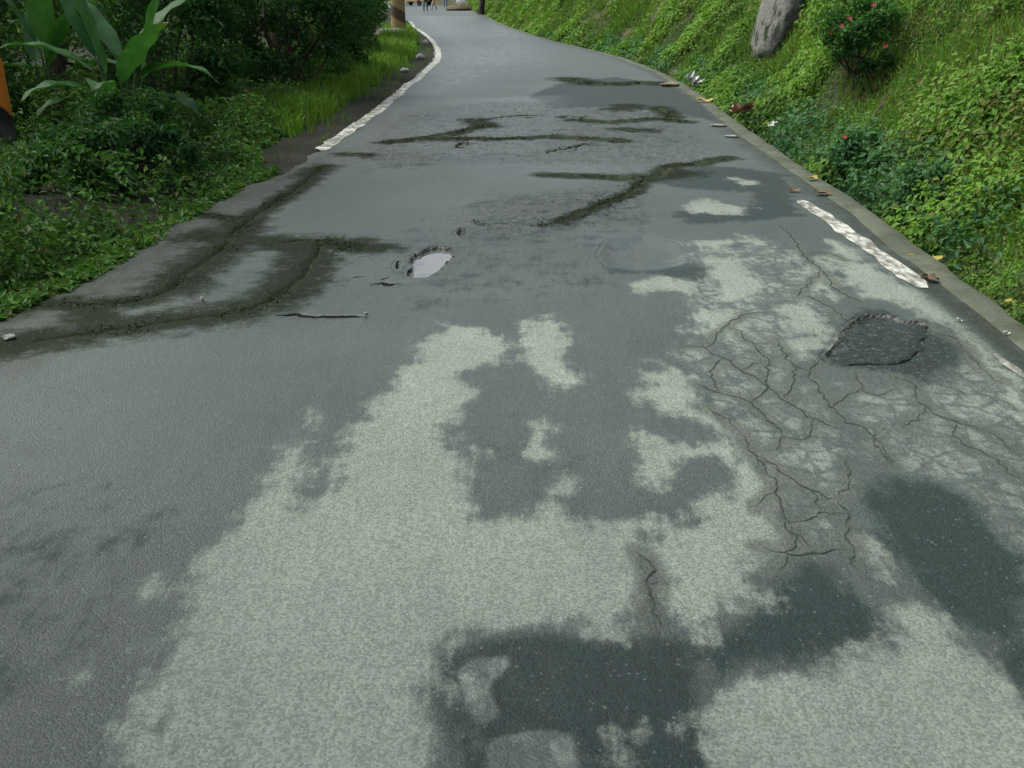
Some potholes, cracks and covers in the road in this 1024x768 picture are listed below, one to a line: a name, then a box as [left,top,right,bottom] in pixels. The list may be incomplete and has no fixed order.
pothole [396,244,461,280]
crack [635,551,661,624]
crack [681,223,1019,569]
